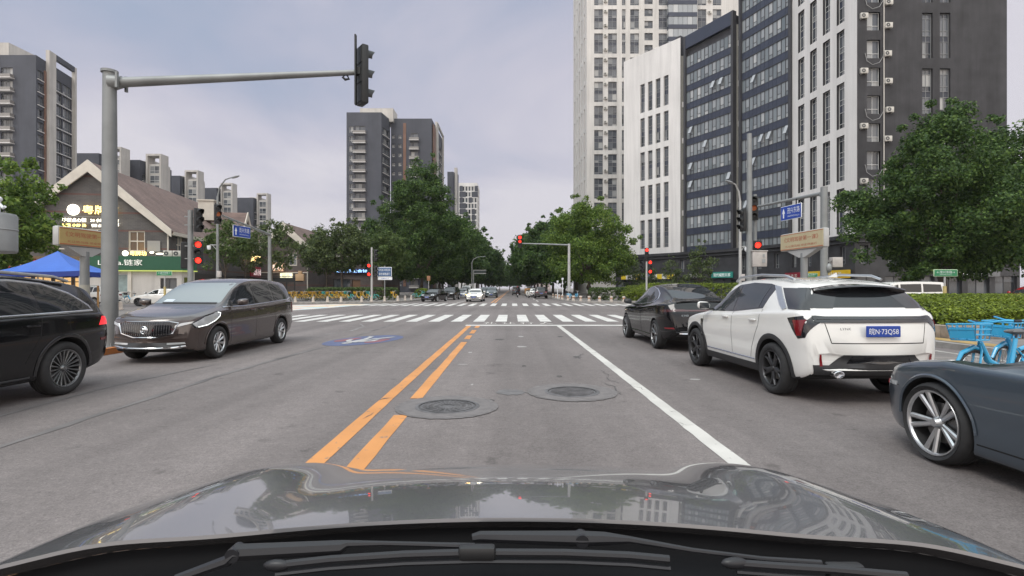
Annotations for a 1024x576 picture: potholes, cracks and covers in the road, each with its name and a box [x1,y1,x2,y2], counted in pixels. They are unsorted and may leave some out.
manhole cover [395,396,498,419]
manhole cover [527,384,618,401]
